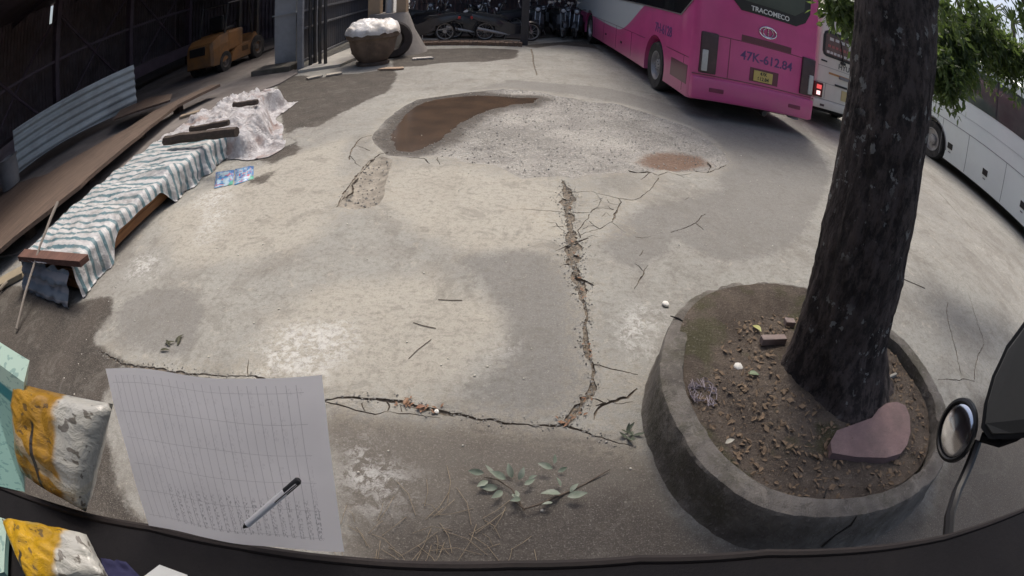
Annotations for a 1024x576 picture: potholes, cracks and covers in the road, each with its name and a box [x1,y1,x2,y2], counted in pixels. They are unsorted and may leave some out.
pothole [372,89,730,179]
pothole [338,157,393,209]
crack [528,162,726,427]
crack [939,300,984,381]
crack [337,135,440,207]
